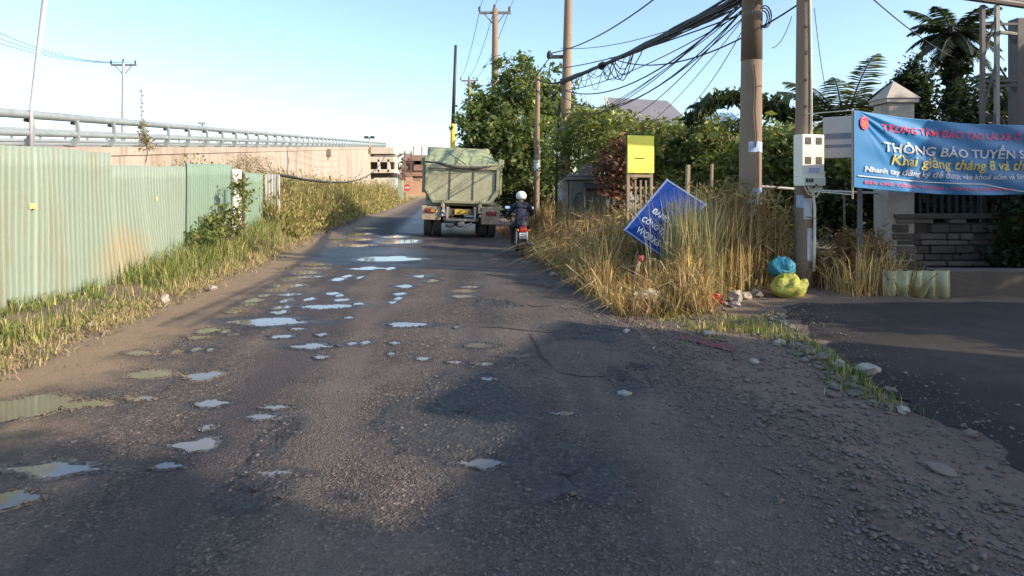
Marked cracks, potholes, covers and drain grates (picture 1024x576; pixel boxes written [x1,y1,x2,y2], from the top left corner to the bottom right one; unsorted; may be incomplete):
pothole [457,341,498,349]
pothole [162,435,222,454]
crack [500,327,608,377]
pothole [187,397,235,409]
pothole [246,416,308,469]
pothole [118,365,188,381]
pothole [213,315,327,327]
pothole [382,320,435,328]
pothole [0,388,87,425]
pothole [0,455,115,482]
pothole [239,411,293,422]
pothole [53,397,129,410]
